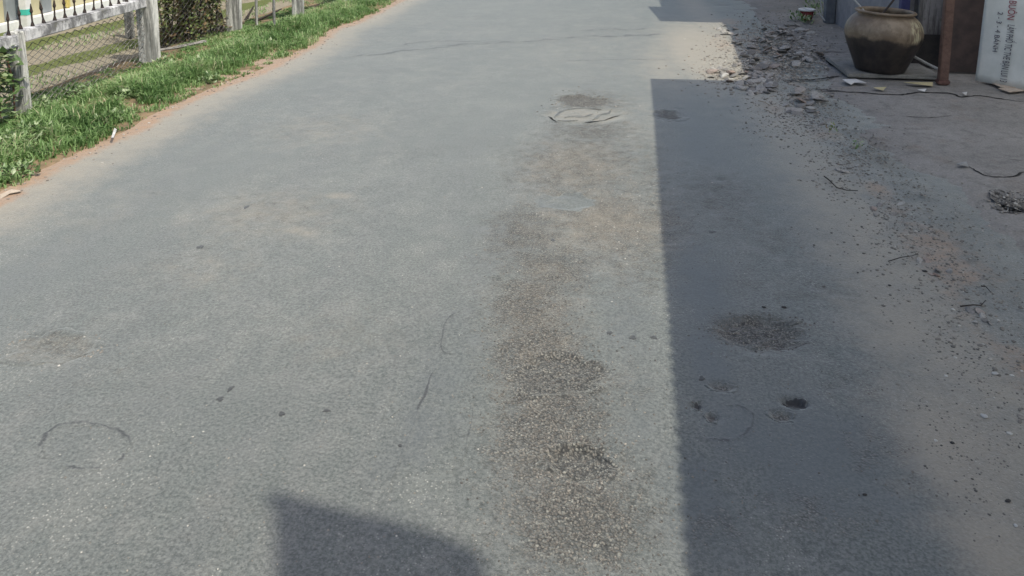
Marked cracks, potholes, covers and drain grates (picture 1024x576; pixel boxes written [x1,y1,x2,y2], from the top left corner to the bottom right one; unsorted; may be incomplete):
crack [33,418,135,472]
crack [348,28,667,58]
crack [692,403,758,444]
crack [384,309,463,497]
pothole [779,398,808,410]
